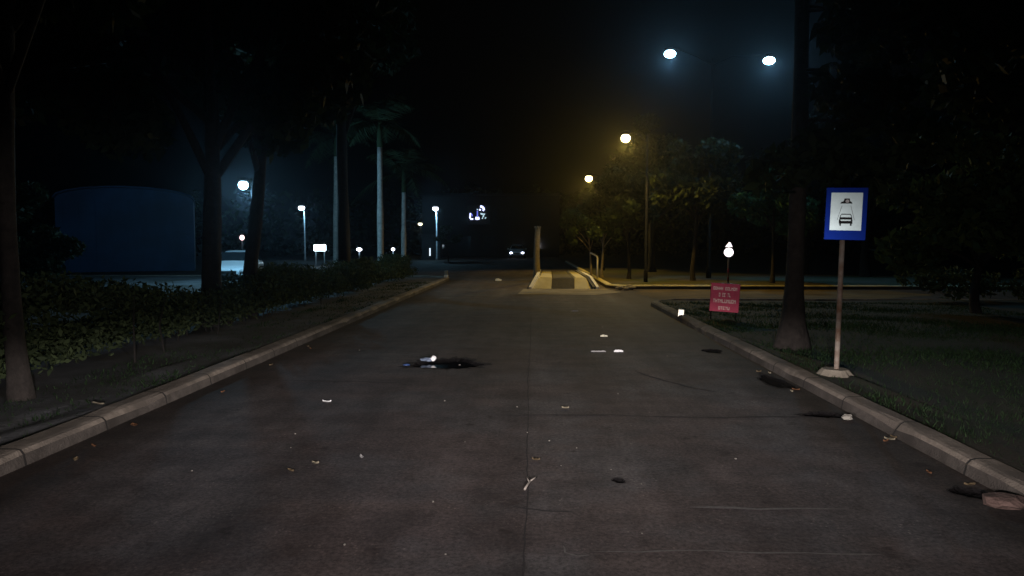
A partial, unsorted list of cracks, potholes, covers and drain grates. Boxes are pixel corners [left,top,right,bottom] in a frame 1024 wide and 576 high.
pothole [794,410,843,418]
pothole [398,356,492,370]
pothole [756,373,801,390]
pothole [946,485,986,499]
